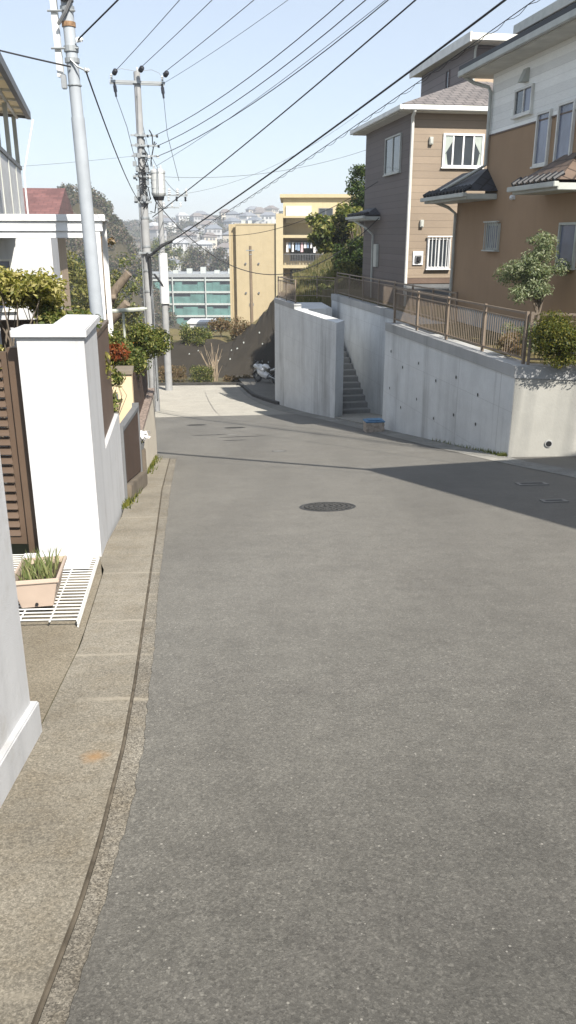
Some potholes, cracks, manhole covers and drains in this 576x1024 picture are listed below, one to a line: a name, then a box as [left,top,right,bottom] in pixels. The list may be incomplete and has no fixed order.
manhole cover [299,502,356,511]
